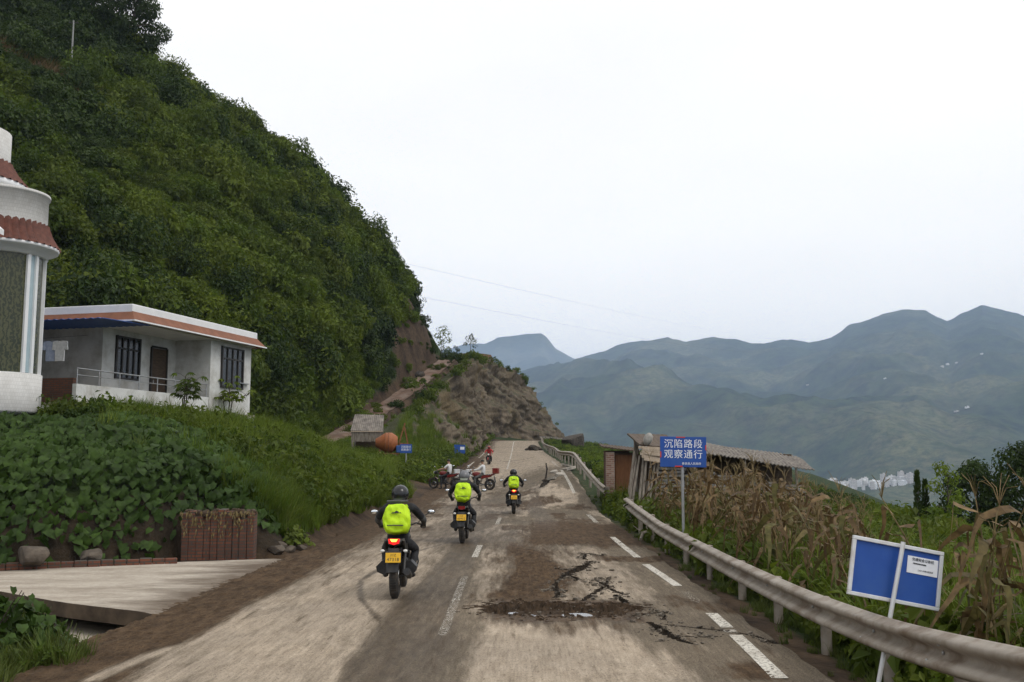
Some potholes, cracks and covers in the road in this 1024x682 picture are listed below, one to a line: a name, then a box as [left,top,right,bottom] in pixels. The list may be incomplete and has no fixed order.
crack [551,552,629,601]
pothole [453,597,653,622]
